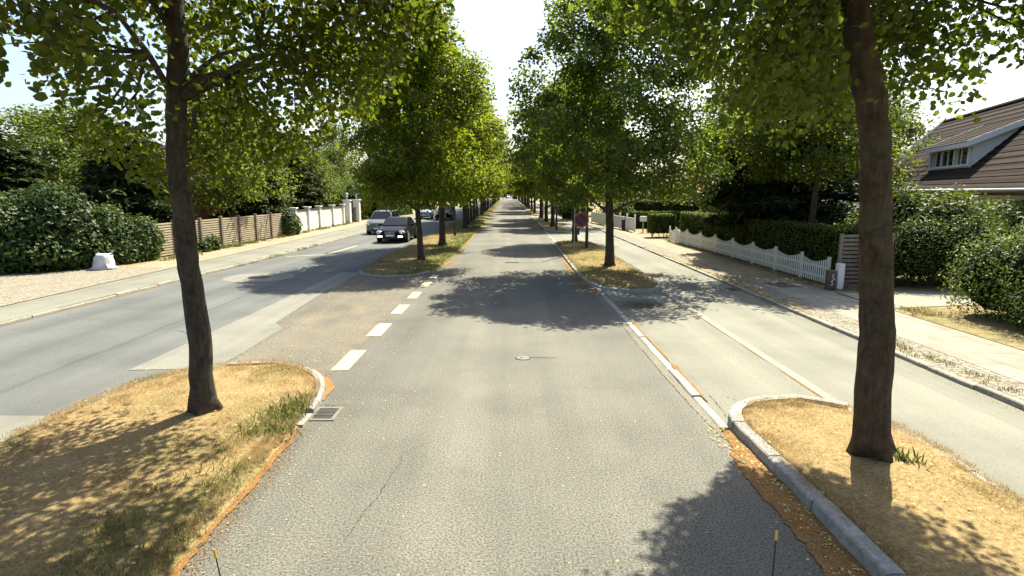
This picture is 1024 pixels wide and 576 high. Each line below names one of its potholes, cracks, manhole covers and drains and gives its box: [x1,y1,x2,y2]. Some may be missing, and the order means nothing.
drain grate [308,407,344,421]
